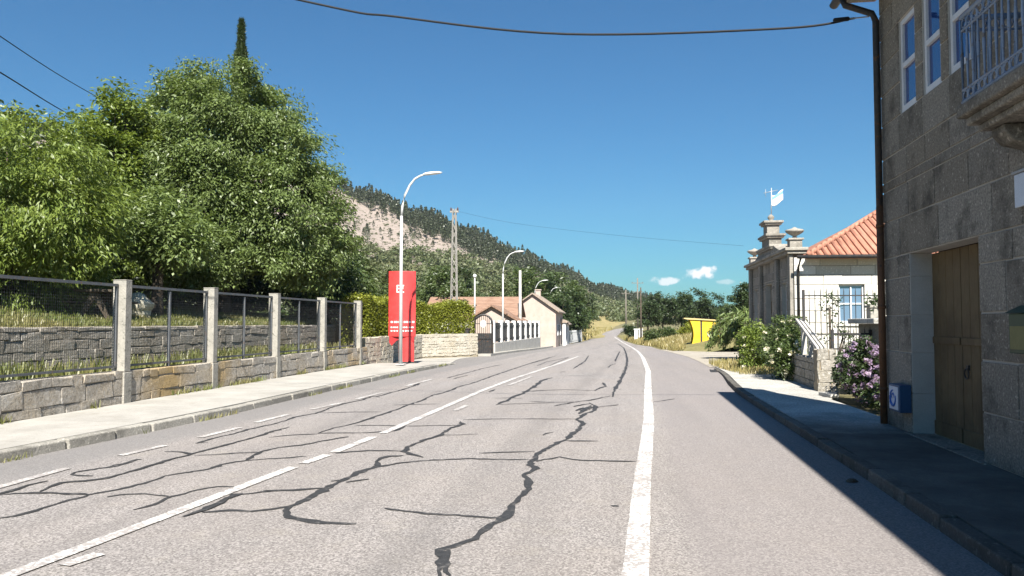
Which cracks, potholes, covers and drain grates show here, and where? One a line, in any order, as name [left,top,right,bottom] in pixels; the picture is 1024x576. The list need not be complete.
crack [0,344,628,525]
